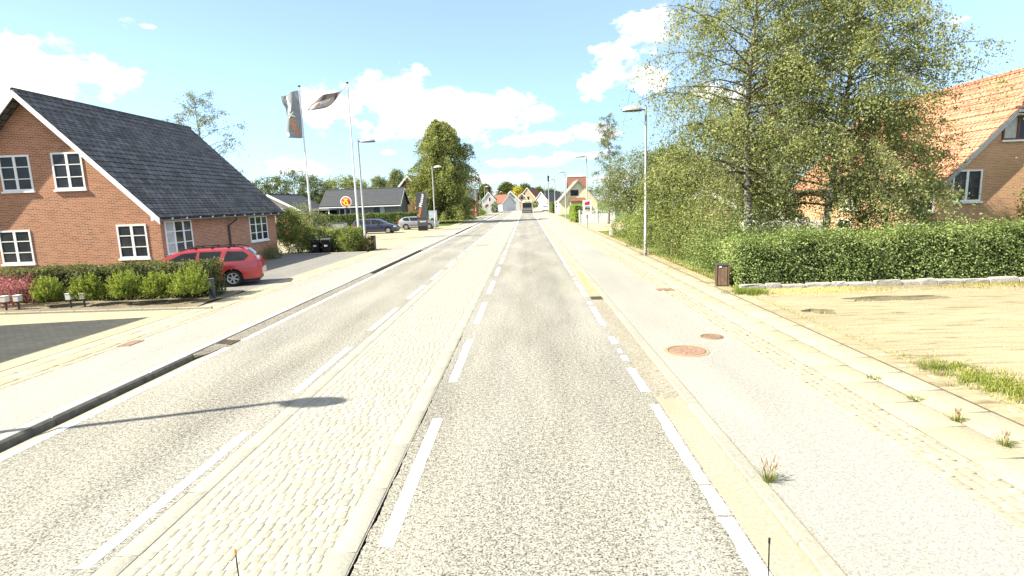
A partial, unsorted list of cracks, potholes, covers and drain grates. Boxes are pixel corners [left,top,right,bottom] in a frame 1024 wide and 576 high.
manhole cover [664,345,710,357]
